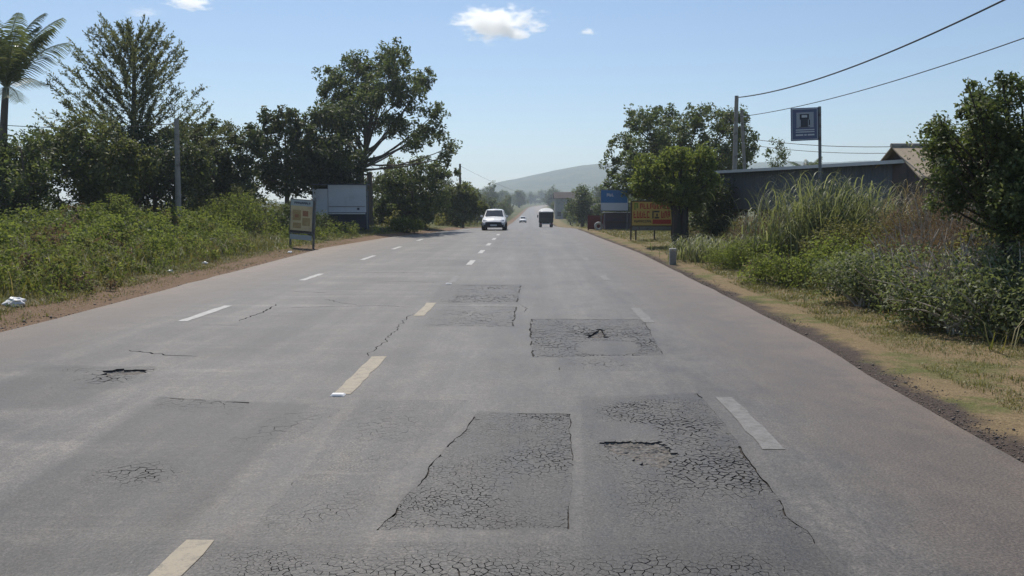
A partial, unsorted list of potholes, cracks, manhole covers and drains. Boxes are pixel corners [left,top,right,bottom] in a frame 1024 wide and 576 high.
pothole [102,369,147,378]
pothole [586,329,609,338]
crack [51,350,847,576]
crack [367,285,663,372]
pothole [601,441,679,469]
